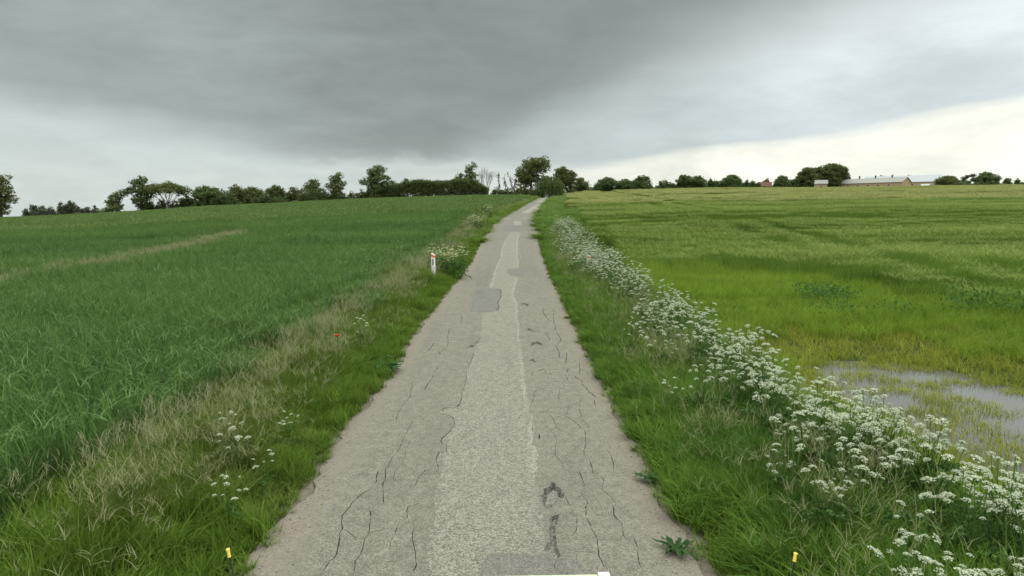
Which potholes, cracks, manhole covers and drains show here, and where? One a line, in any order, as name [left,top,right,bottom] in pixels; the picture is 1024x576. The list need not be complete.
crack [531,310,641,567]
pothole [540,482,564,509]
pothole [544,514,561,558]
crack [318,357,473,573]
